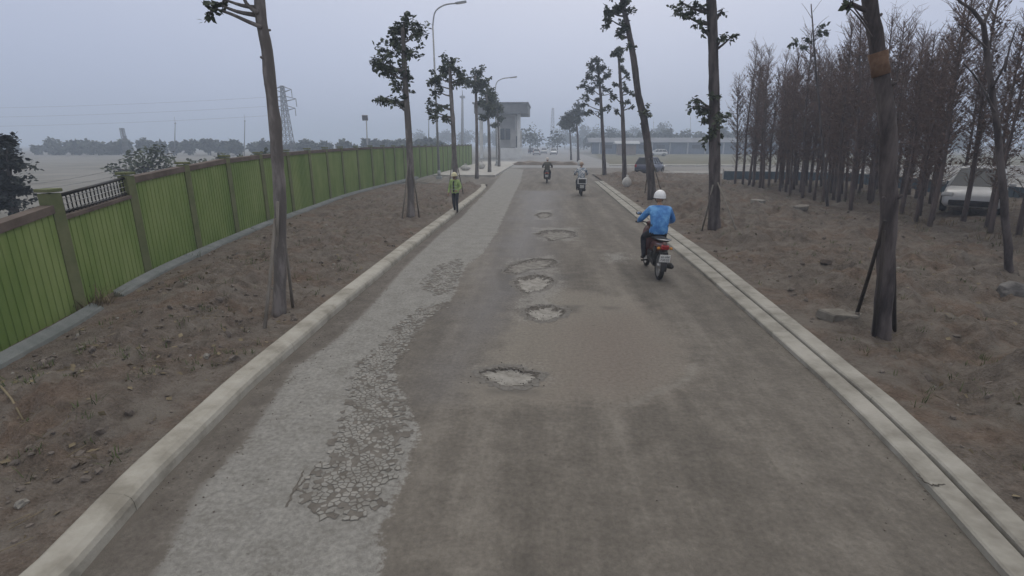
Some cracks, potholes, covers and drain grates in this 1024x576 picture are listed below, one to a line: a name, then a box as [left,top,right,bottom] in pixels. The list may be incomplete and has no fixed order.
pothole [519,303,573,323]
crack [285,258,464,521]
pothole [532,229,579,242]
pothole [508,273,559,295]
pothole [468,362,551,391]
pothole [501,258,562,275]
